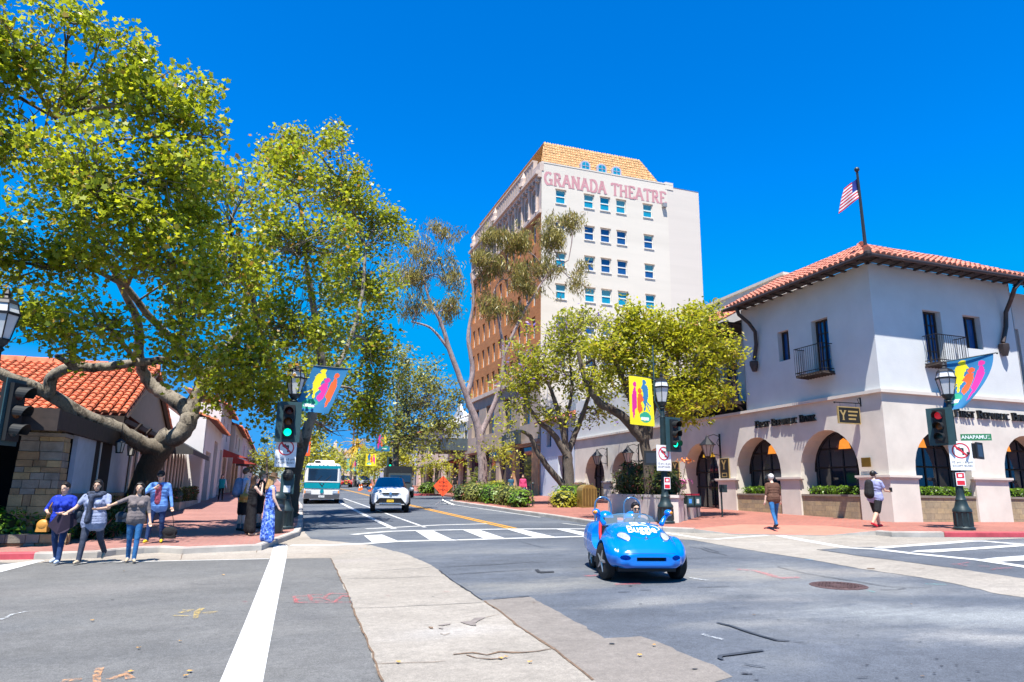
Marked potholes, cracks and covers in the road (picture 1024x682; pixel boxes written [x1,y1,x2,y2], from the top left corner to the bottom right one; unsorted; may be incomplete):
crack [456,647,556,659]
manhole cover [809,581,869,590]
